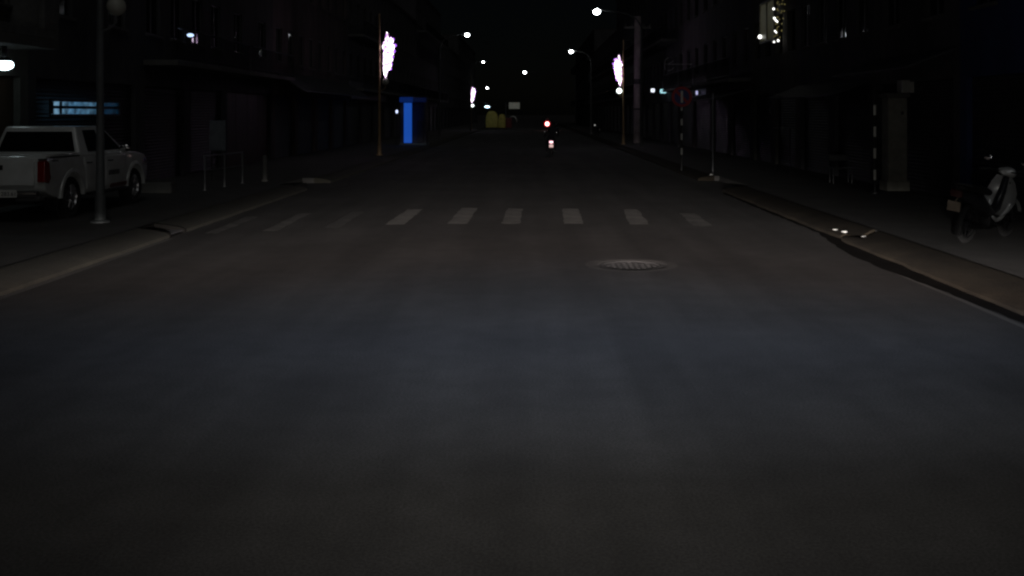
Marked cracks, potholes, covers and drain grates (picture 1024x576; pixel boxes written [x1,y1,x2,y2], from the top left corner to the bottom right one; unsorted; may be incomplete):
manhole cover [585,258,678,272]
